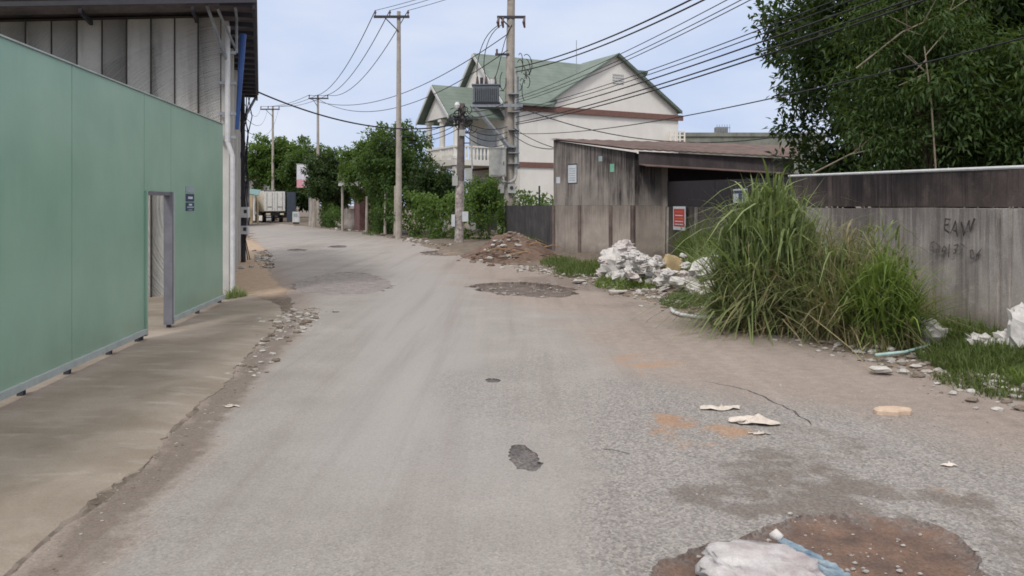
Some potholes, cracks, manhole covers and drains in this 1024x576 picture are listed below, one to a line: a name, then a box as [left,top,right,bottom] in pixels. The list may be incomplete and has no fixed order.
pothole [645,510,991,576]
crack [705,381,812,425]
pothole [508,445,543,471]
pothole [465,281,580,298]
